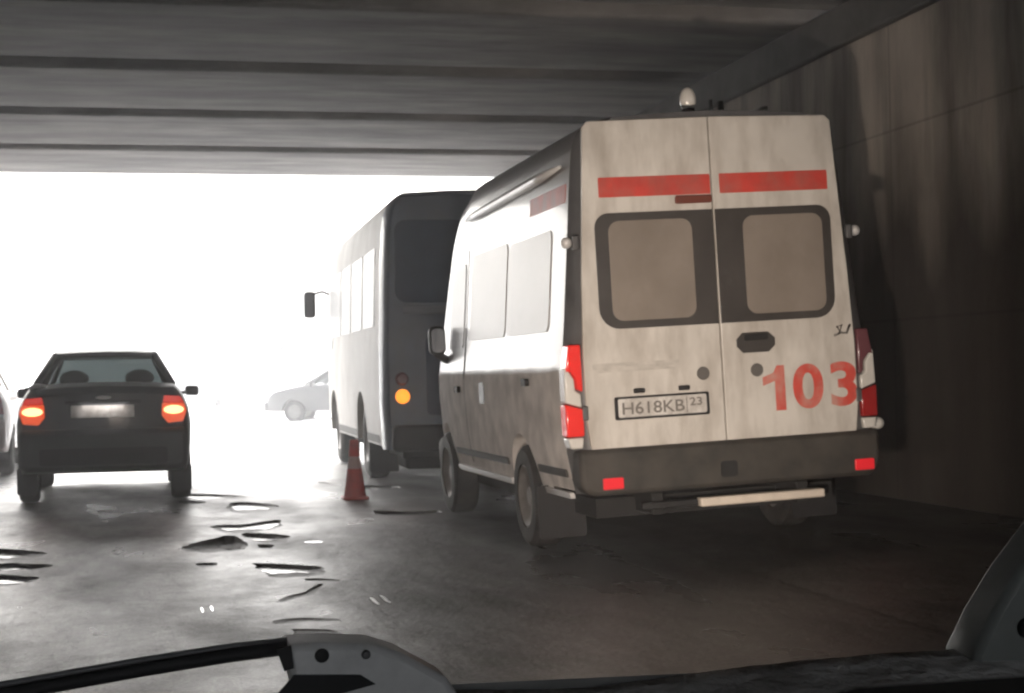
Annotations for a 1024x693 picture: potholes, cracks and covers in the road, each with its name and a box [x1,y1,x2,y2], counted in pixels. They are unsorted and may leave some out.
pothole [253,563,326,577]
pothole [0,574,40,586]
pothole [210,520,283,533]
pothole [226,502,280,513]
pothole [181,535,248,553]
pothole [0,563,53,571]
crack [272,578,341,624]
pothole [0,549,47,561]
pothole [242,533,290,543]
